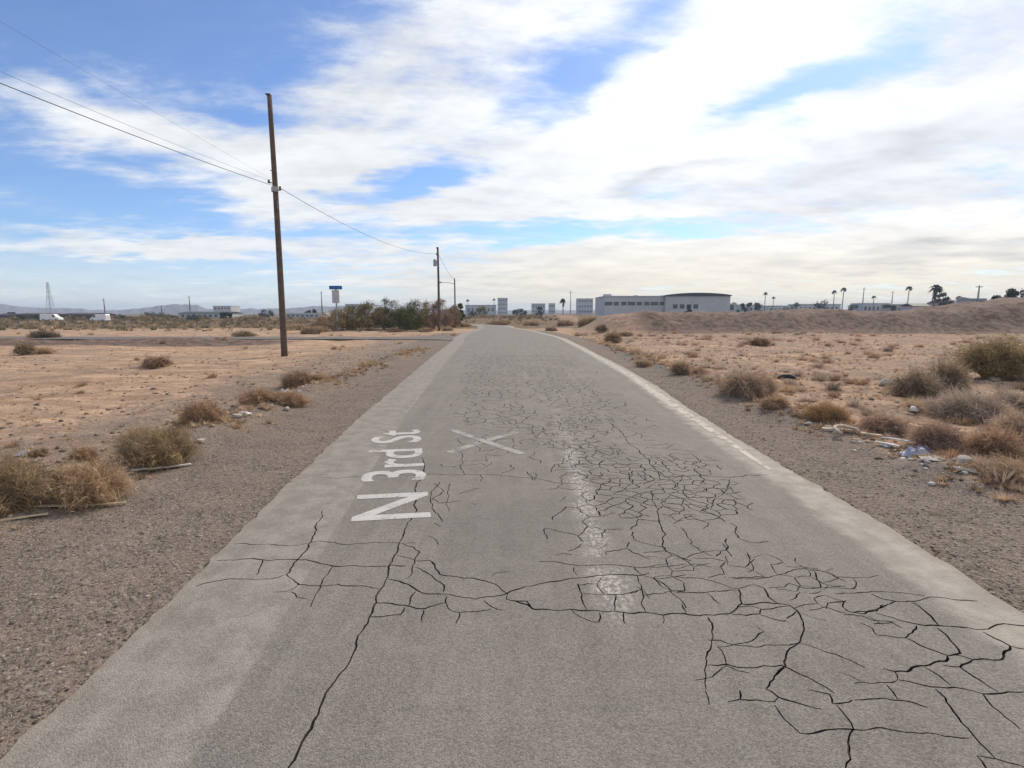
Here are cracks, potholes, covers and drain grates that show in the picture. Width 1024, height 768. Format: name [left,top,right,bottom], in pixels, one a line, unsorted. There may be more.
crack [324,355,627,522]
crack [195,408,1024,768]
